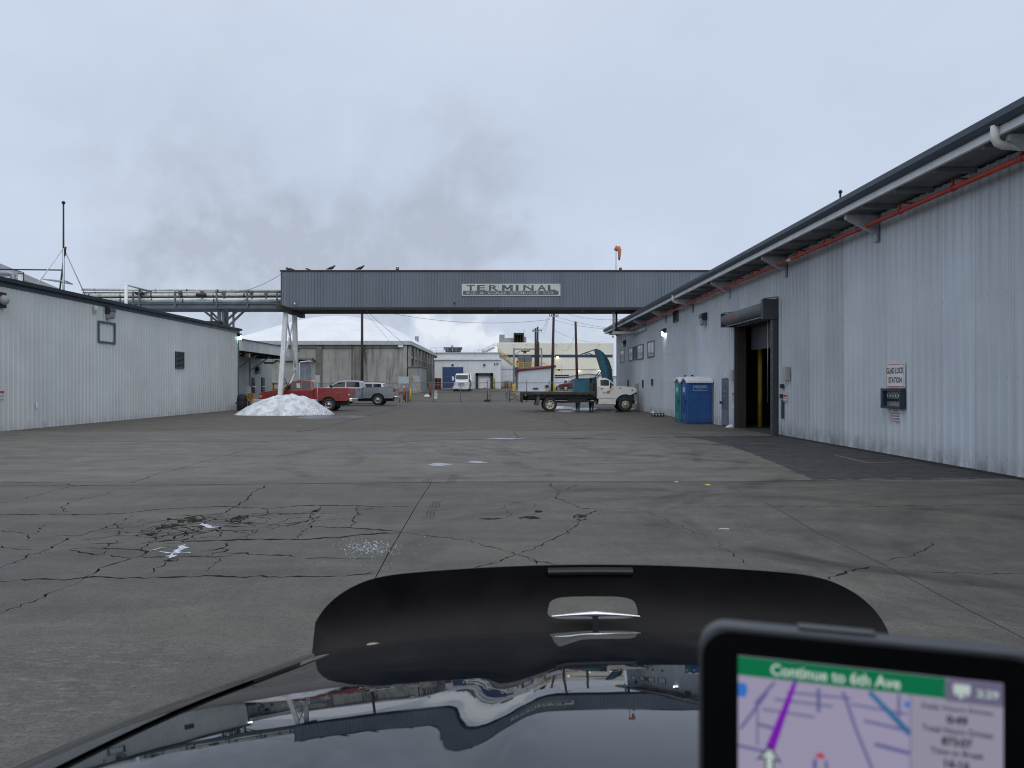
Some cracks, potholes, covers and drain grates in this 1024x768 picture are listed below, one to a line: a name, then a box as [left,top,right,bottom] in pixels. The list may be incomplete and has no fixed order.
pothole [177,515,207,523]
crack [0,482,706,612]
